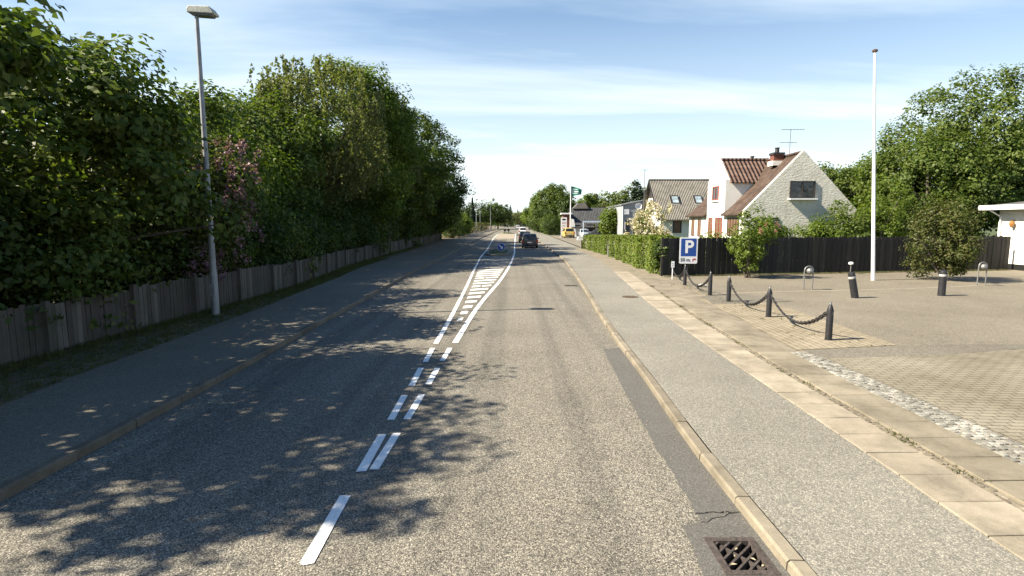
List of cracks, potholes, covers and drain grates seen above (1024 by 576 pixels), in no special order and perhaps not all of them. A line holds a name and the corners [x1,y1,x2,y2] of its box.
drain grate [703,537,781,576]
